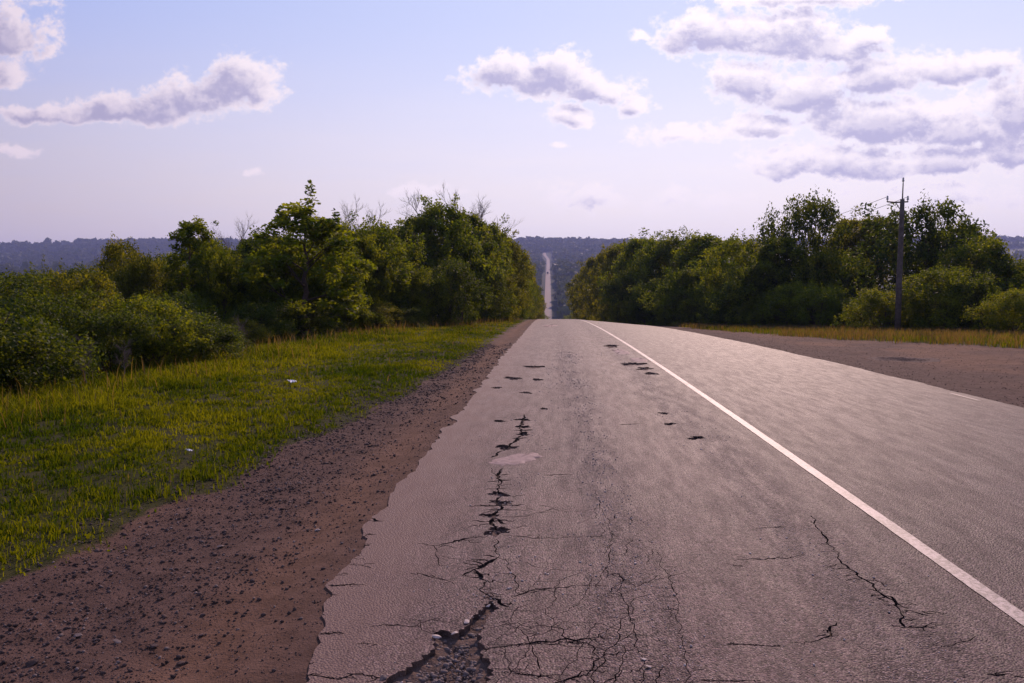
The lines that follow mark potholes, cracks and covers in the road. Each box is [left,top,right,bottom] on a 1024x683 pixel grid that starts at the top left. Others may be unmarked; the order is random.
pothole [383,600,499,683]
crack [308,468,761,683]
crack [717,516,988,649]
